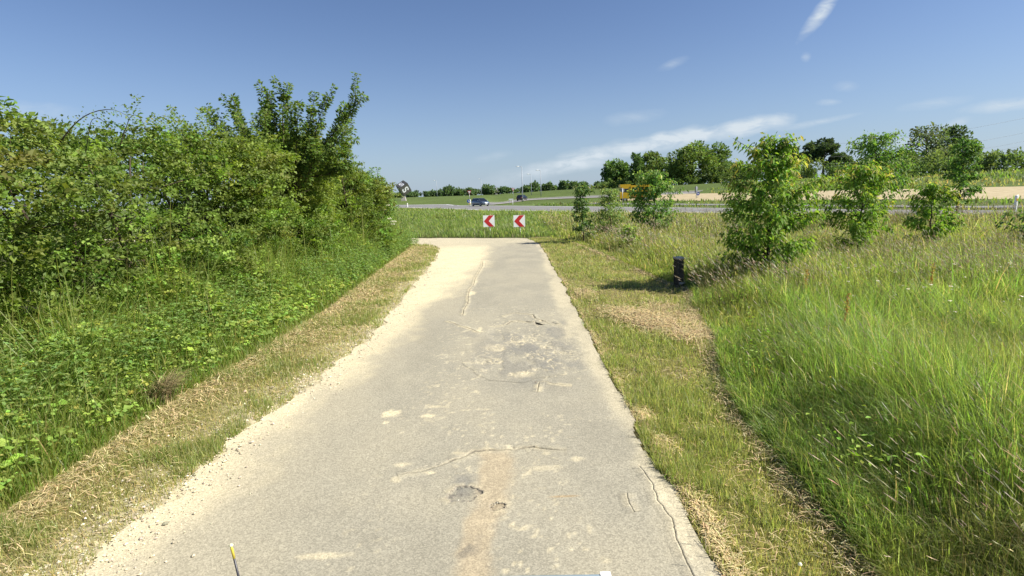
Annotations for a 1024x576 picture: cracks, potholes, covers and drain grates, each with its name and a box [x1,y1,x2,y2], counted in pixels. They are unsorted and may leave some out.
crack [617,465,706,576]
crack [396,442,567,480]
pothole [480,497,516,517]
crack [443,312,583,392]
pothole [436,481,493,508]
